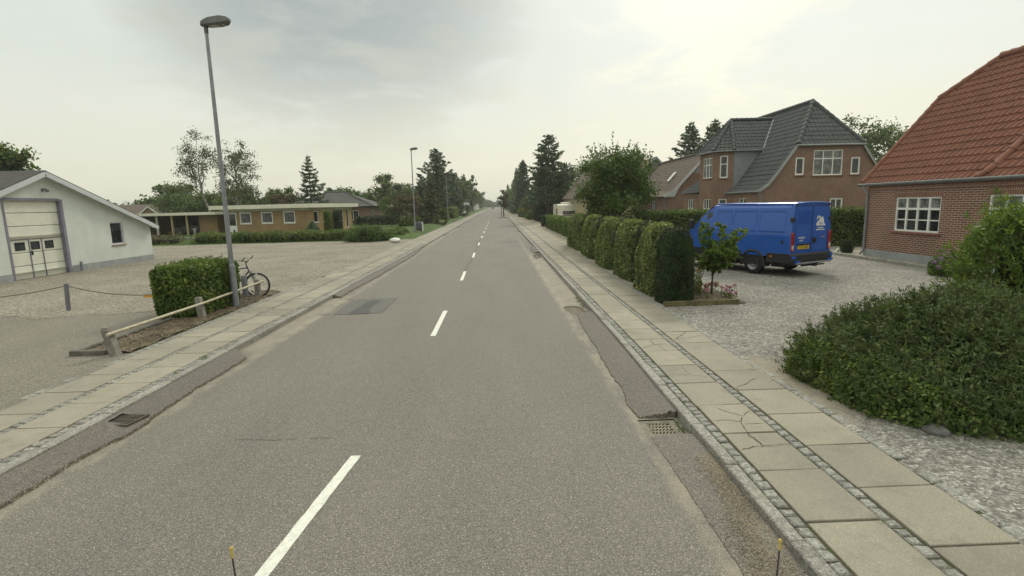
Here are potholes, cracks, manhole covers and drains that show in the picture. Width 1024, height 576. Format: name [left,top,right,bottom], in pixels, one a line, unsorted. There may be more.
crack [713,408,791,449]
drain grate [108,413,150,427]
drain grate [638,420,684,436]
